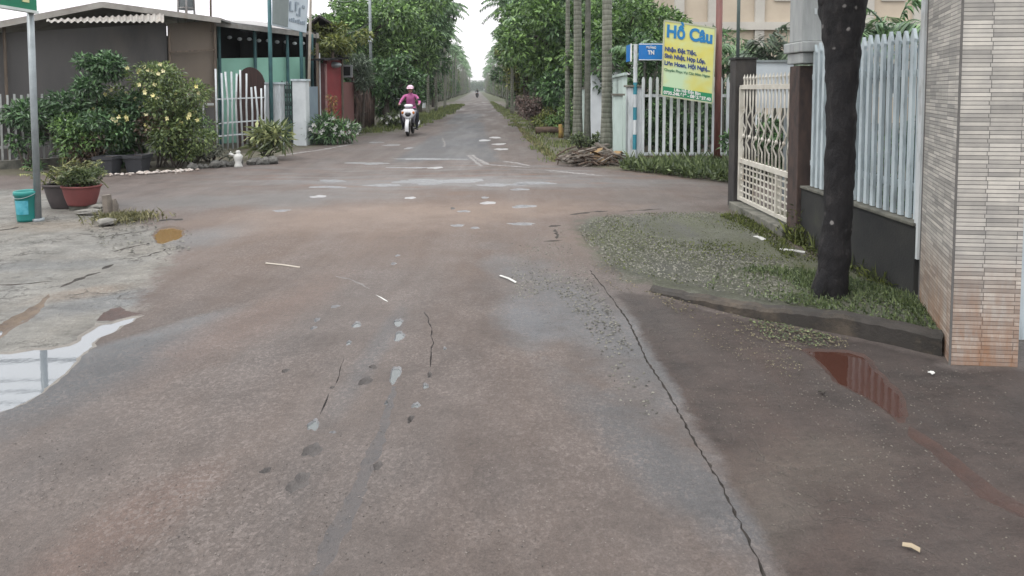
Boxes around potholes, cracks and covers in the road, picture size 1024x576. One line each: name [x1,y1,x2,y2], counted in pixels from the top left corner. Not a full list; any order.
pothole [97,307,143,321]
pothole [152,226,185,244]
crack [591,271,766,576]
pothole [301,442,323,457]
pothole [285,472,311,494]
crack [5,232,170,287]
crack [424,312,434,367]
pothole [0,293,50,338]
